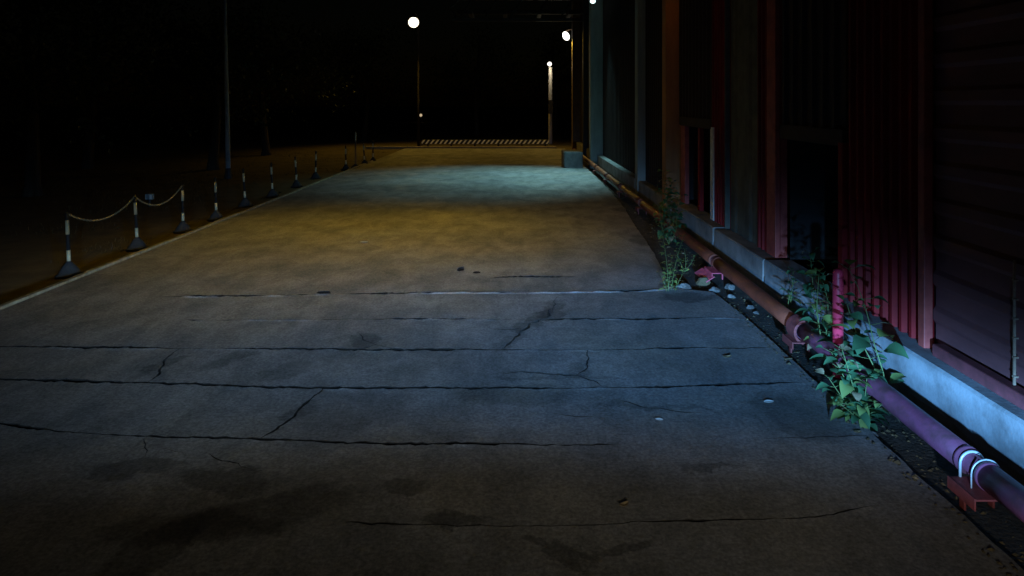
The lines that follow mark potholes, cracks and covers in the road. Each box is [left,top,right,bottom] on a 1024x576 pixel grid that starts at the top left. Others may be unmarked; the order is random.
crack [146,352,174,390]
crack [263,389,323,437]
crack [505,351,698,413]
crack [501,297,557,350]
